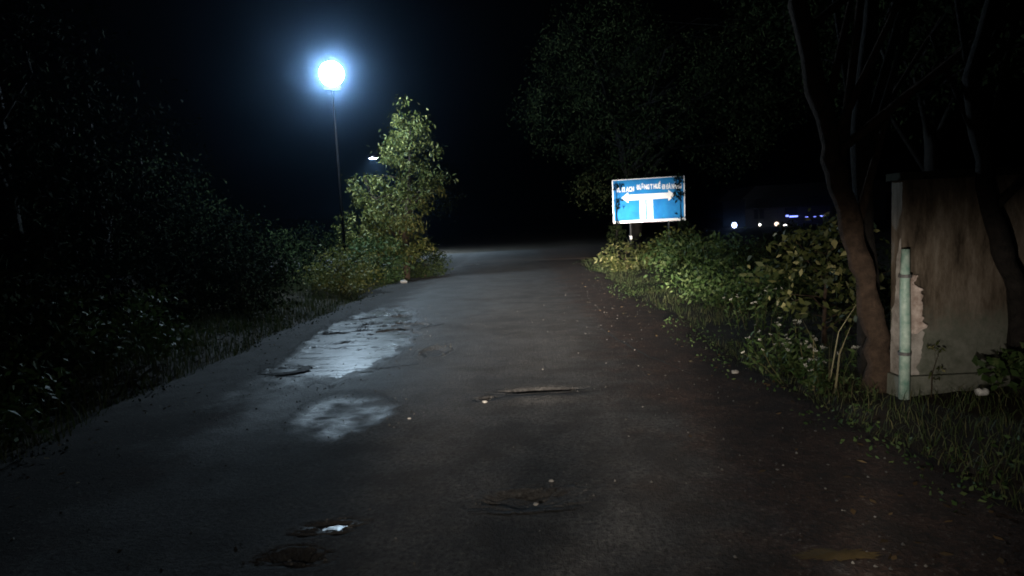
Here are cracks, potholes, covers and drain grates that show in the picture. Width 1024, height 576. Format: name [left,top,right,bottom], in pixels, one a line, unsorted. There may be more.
crack [467,505,583,514]
pothole [286,519,370,536]
pothole [263,304,440,397]
pothole [245,546,340,569]
